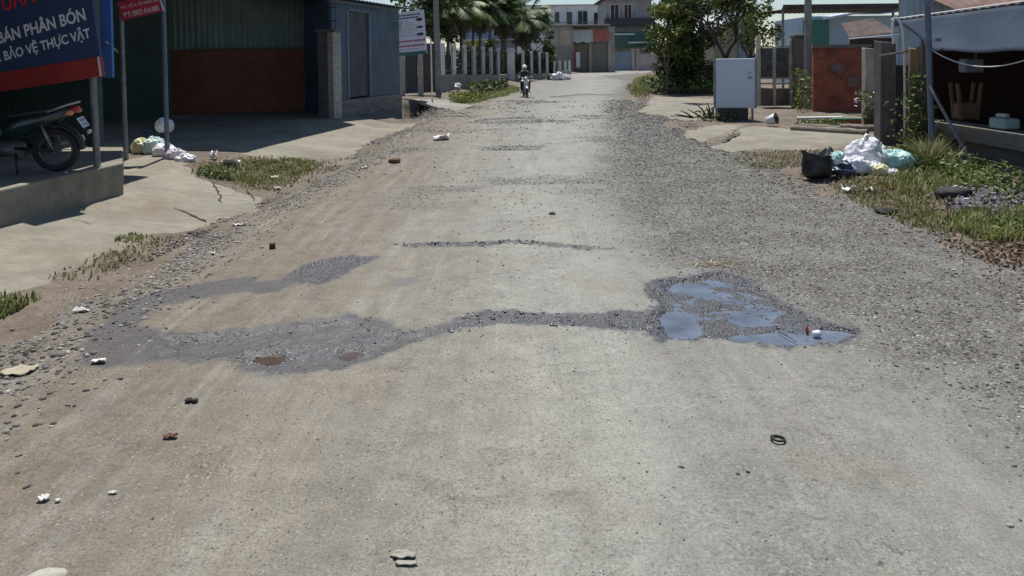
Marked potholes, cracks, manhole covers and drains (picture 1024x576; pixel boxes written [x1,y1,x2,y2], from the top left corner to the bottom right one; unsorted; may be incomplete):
pothole [291,254,383,285]
crack [174,179,222,222]
pothole [640,269,864,350]
pothole [146,313,446,377]
crack [402,240,617,251]
